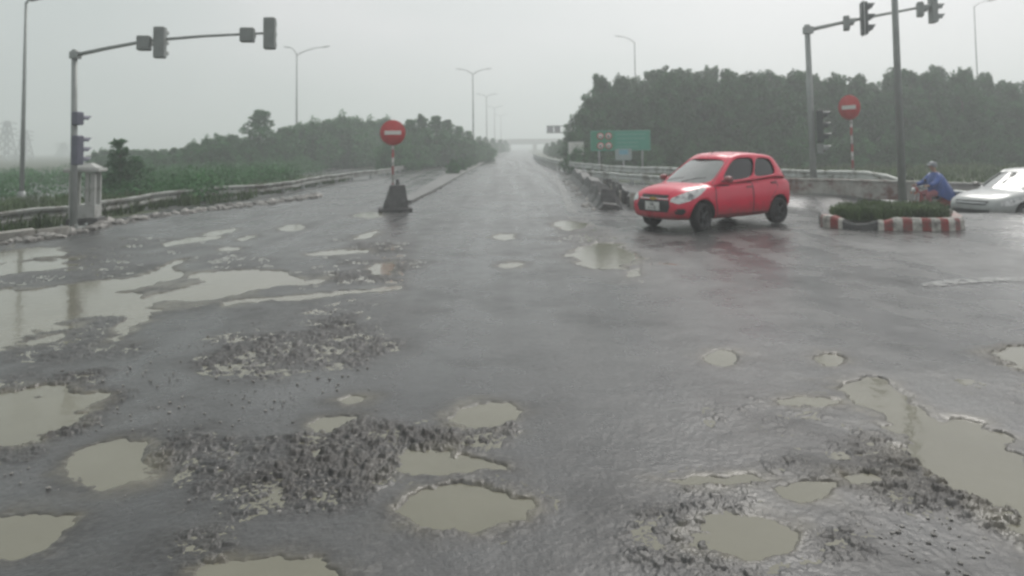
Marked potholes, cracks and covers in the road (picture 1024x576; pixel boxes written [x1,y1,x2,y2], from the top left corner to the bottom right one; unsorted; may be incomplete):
pothole [700,348,744,368]
pothole [808,351,849,367]
pothole [564,241,649,270]
pothole [302,412,369,433]
pothole [0,382,121,448]
pothole [387,478,544,537]
pothole [828,373,1024,554]
pothole [767,475,848,505]
pothole [0,246,86,276]
pothole [0,257,330,351]
pothole [435,397,526,431]
pothole [391,440,515,477]
